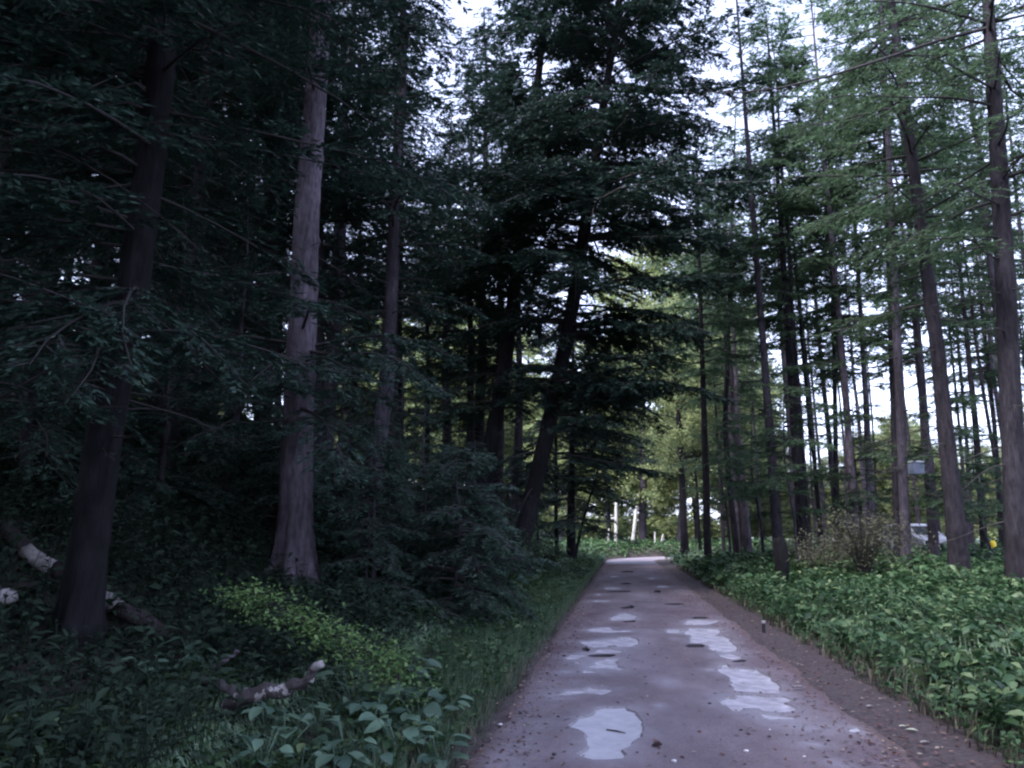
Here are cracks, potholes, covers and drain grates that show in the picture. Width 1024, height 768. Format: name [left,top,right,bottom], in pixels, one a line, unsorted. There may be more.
pothole [683,628,738,652]
